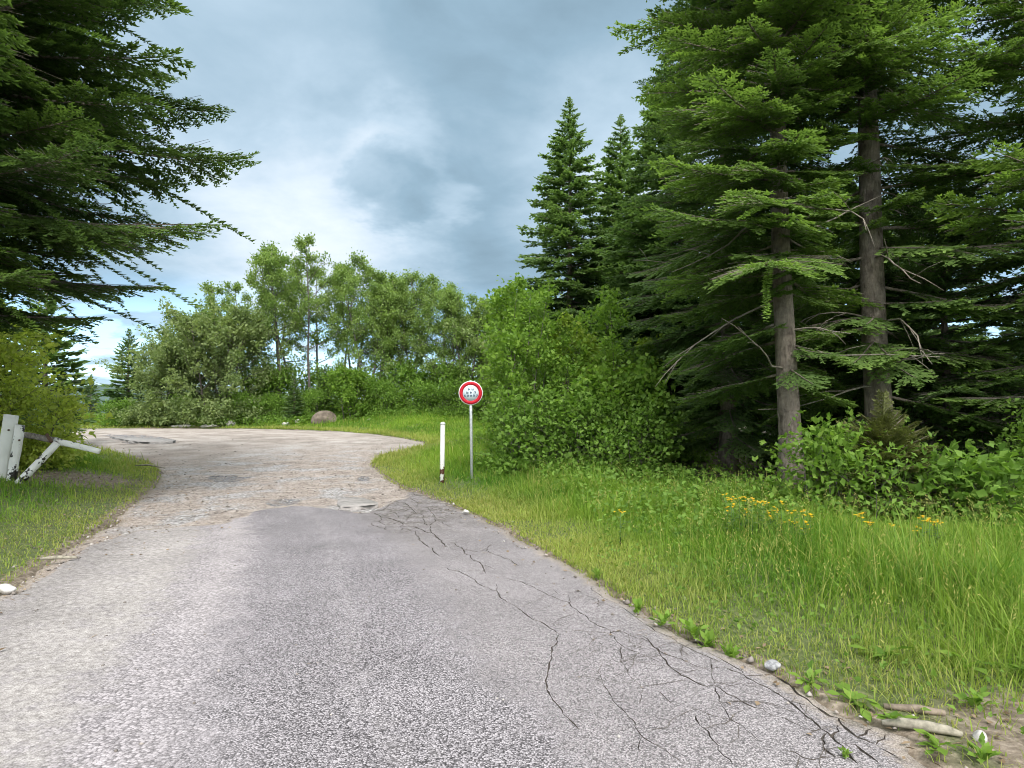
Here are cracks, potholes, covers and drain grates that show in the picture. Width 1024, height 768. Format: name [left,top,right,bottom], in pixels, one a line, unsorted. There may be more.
crack [349,499,578,728]
crack [510,579,895,767]
